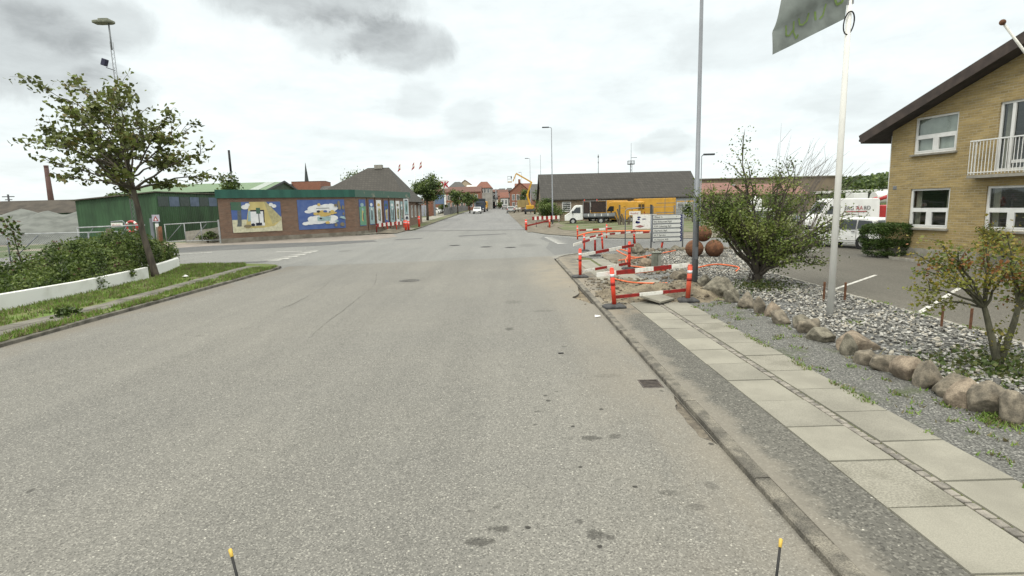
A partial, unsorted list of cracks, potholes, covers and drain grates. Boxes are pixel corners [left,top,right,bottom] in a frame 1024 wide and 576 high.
drain grate [638,379,664,388]
